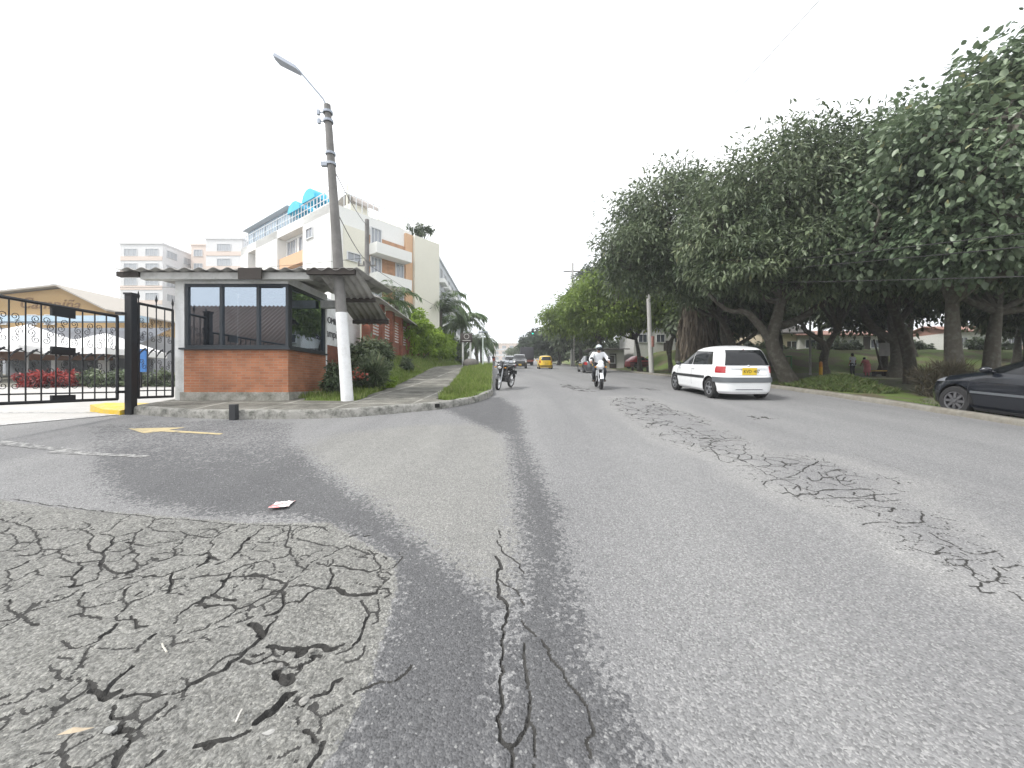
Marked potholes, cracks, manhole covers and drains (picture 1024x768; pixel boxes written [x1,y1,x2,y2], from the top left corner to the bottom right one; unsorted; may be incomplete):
crack [610,387,1024,602]
crack [0,499,413,768]
crack [494,530,597,768]
